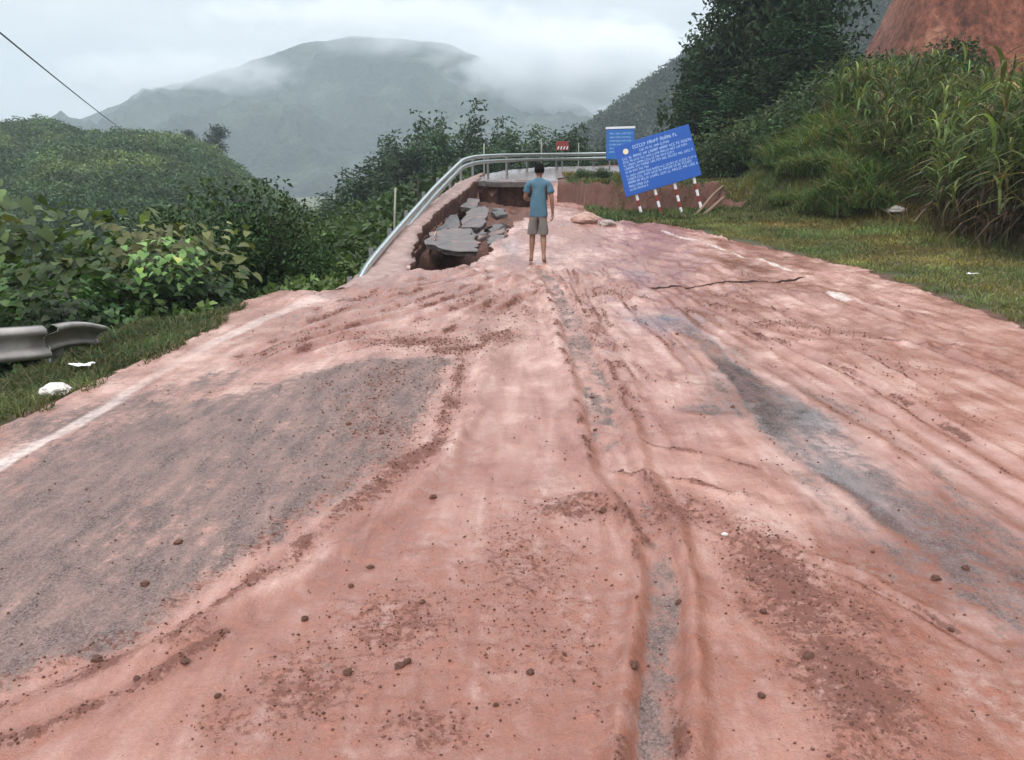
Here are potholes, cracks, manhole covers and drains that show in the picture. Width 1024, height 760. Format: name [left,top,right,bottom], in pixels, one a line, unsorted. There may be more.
crack [648,277,804,289]
